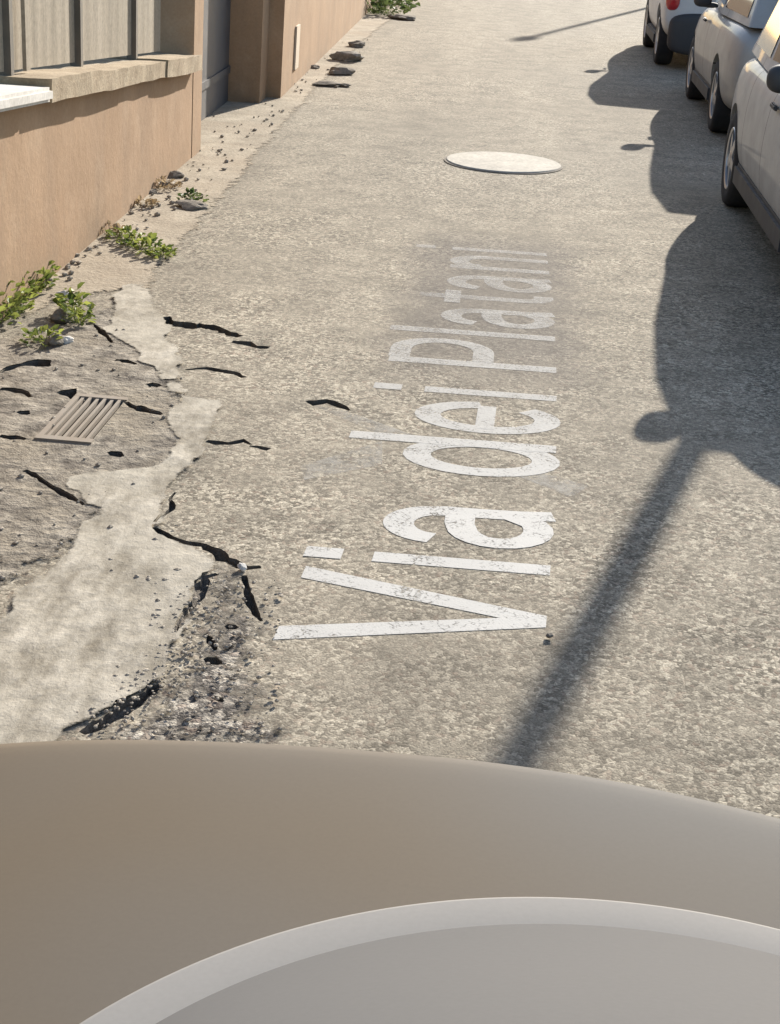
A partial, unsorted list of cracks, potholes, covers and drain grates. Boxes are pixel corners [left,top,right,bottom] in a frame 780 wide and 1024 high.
drain grate [34,393,129,444]
crack [163,316,270,349]
pothole [79,684,164,735]
crack [126,404,162,415]
crack [25,472,83,505]
manhole cover [444,152,563,175]
crack [206,439,271,451]
crack [94,326,113,343]
crack [1,361,51,397]
crack [153,492,263,621]
crack [185,367,246,378]
